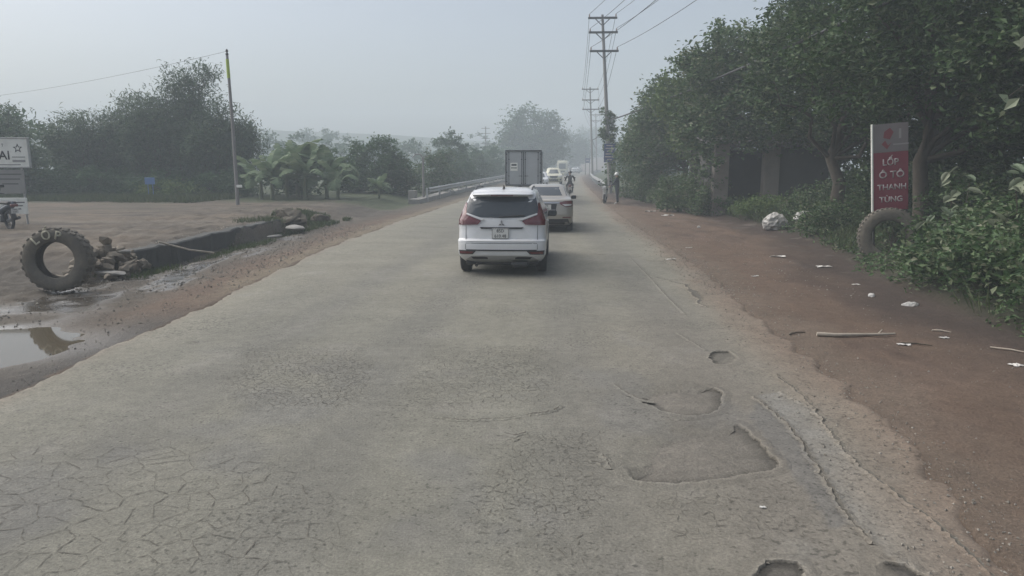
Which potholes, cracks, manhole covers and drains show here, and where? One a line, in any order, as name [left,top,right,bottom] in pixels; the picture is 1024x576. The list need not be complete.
crack [648,374,999,576]
pothole [616,381,732,420]
crack [0,437,367,576]
crack [470,428,617,566]
pothole [701,349,747,367]
crack [394,342,564,442]
pothole [734,553,822,576]
pothole [858,554,942,576]
crack [638,259,709,307]
pothole [611,419,792,490]
